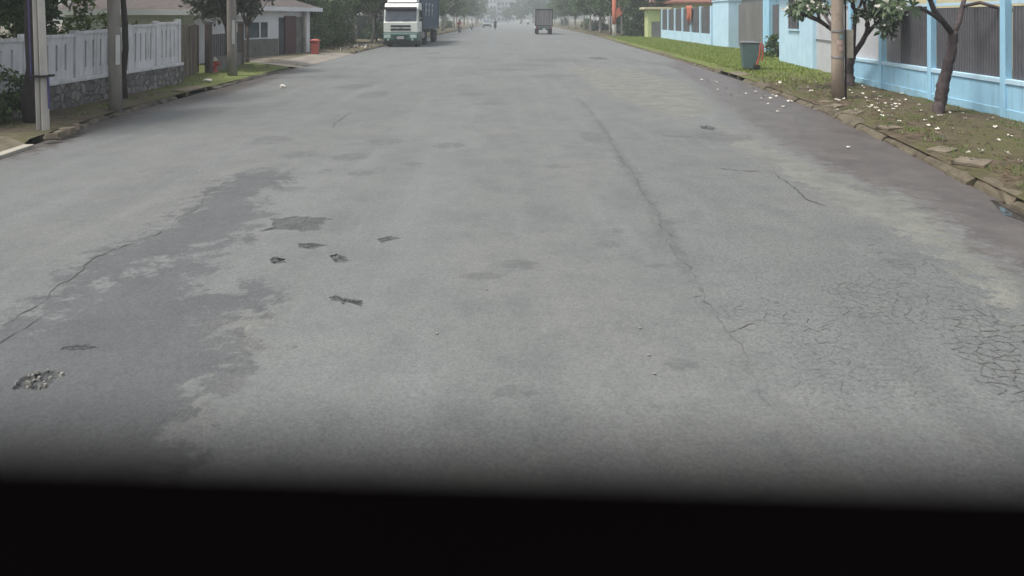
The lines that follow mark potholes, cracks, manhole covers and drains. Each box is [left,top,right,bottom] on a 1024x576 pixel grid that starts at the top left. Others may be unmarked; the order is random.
crack [715,168,826,206]
crack [717,232,1024,407]
pothole [269,236,349,259]
